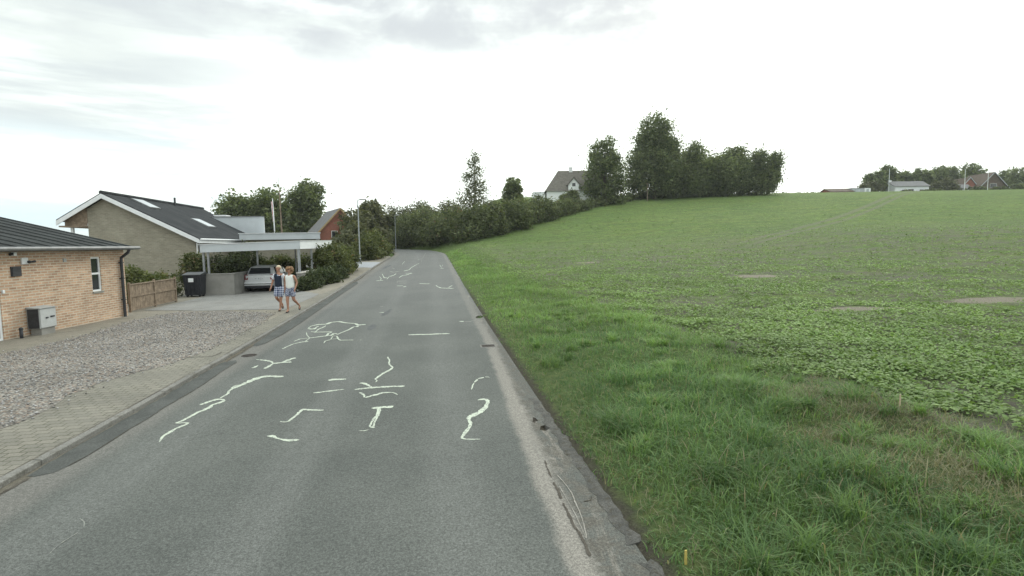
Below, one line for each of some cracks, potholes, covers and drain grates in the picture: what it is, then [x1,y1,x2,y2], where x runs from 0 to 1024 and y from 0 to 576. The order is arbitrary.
crack [544,460,592,556]
